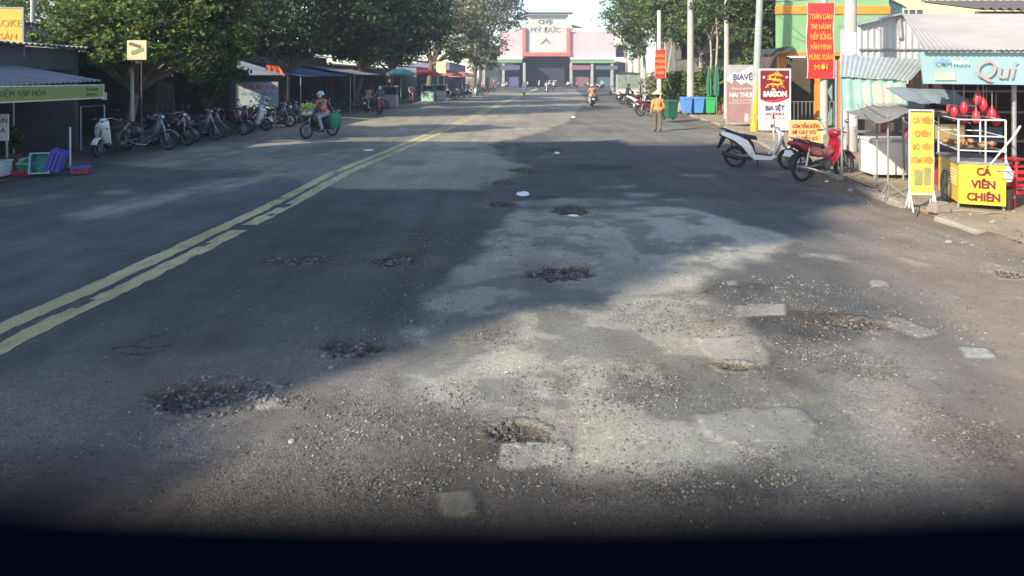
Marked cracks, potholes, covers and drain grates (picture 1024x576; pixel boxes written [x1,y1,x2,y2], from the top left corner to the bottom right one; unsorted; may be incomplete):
pothole [515,264,602,285]
pothole [136,377,262,420]
pothole [803,313,901,335]
pothole [986,268,1024,281]
pothole [475,416,556,448]
pothole [309,336,397,363]
pothole [485,200,518,208]
pothole [542,204,595,217]
pothole [708,359,761,374]
pothole [362,250,426,269]
crack [111,334,175,358]
pothole [253,255,347,268]
